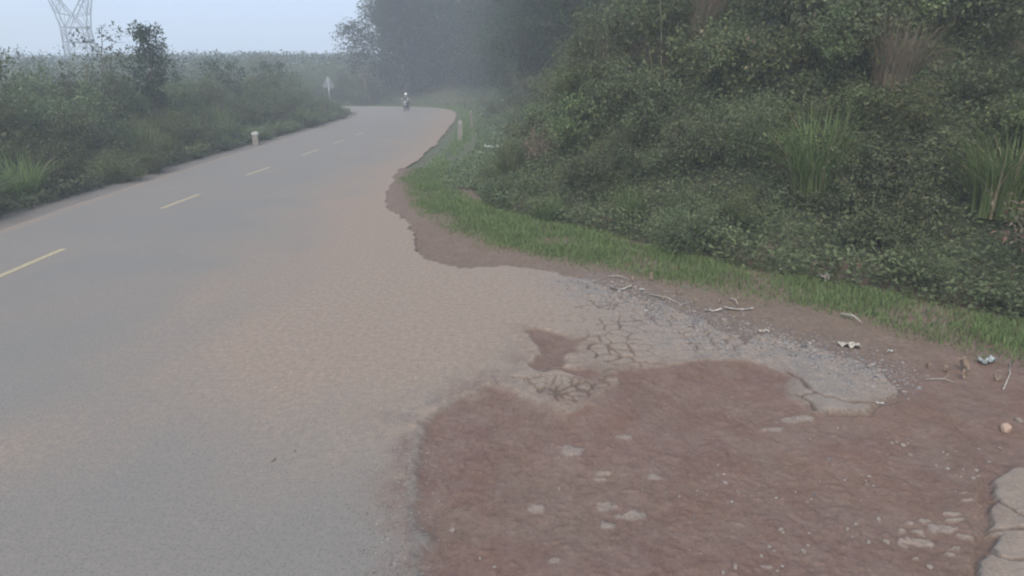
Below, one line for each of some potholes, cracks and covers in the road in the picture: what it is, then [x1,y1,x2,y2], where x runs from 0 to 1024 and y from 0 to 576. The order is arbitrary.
pothole [520,325,609,382]
crack [511,293,878,411]
pothole [390,355,990,576]
